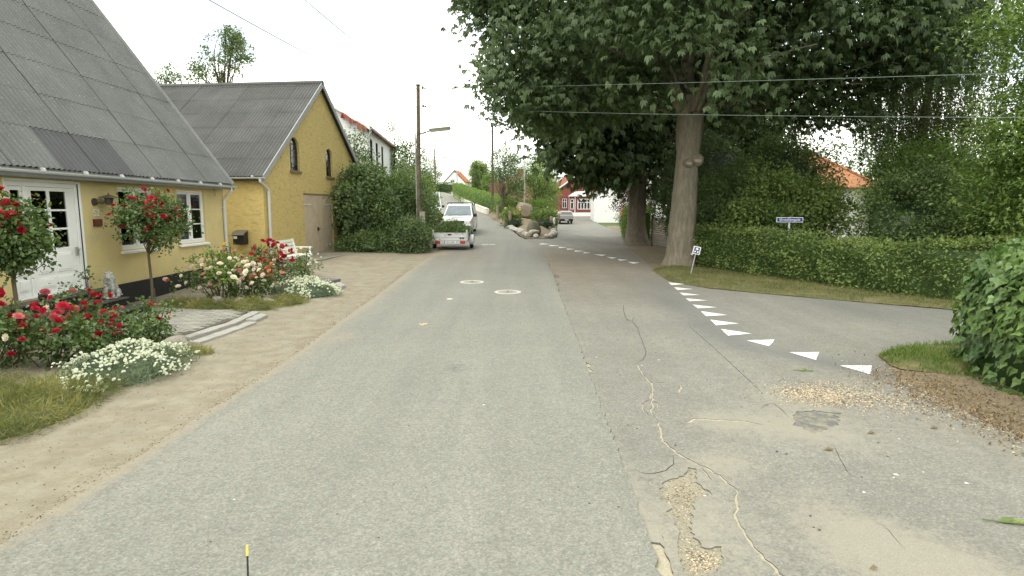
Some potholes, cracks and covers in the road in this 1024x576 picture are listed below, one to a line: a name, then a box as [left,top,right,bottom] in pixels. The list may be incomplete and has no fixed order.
pothole [651,542,673,576]
pothole [659,467,724,576]
crack [623,306,786,576]
